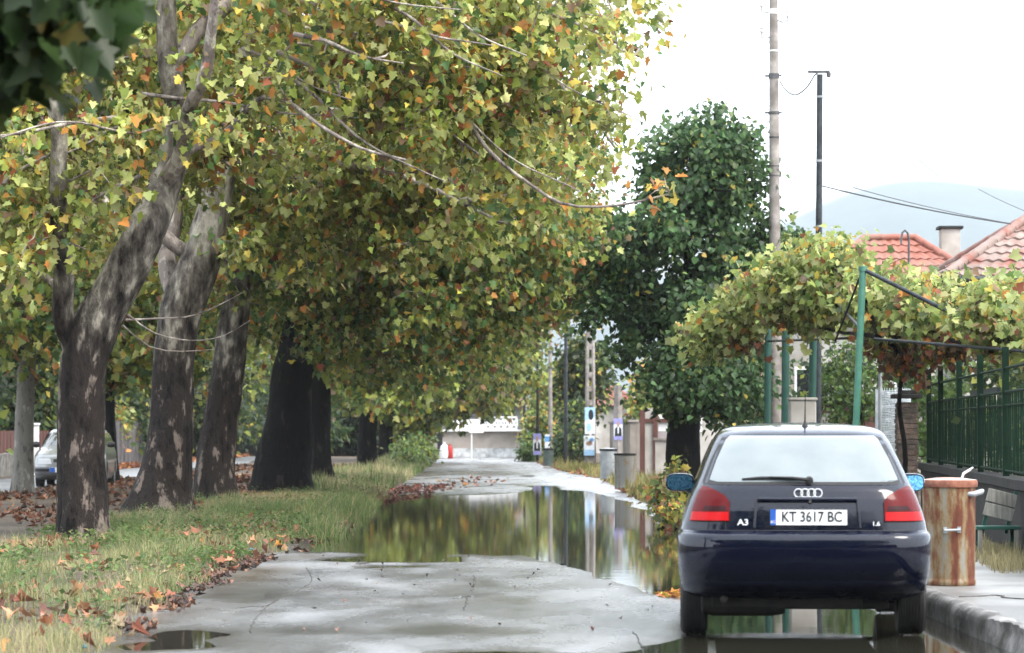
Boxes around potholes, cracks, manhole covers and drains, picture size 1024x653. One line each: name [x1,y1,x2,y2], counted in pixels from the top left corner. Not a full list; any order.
crack [235,568,312,633]
